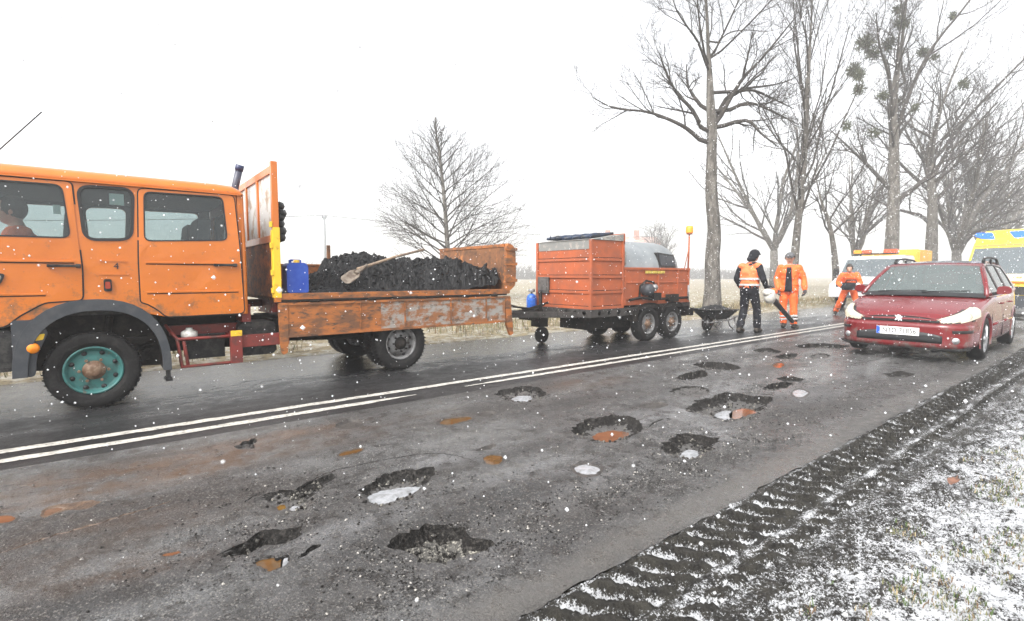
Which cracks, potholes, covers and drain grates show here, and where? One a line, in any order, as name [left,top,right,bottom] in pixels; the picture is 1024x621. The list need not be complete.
pothole [494,386,546,404]
pothole [694,362,740,370]
pothole [571,414,643,443]
pothole [660,433,719,460]
pothole [685,392,773,421]
pothole [387,523,495,565]
pothole [676,370,709,380]
pothole [763,382,792,390]
pothole [217,527,302,558]
pothole [353,467,435,511]
pothole [252,473,336,516]
